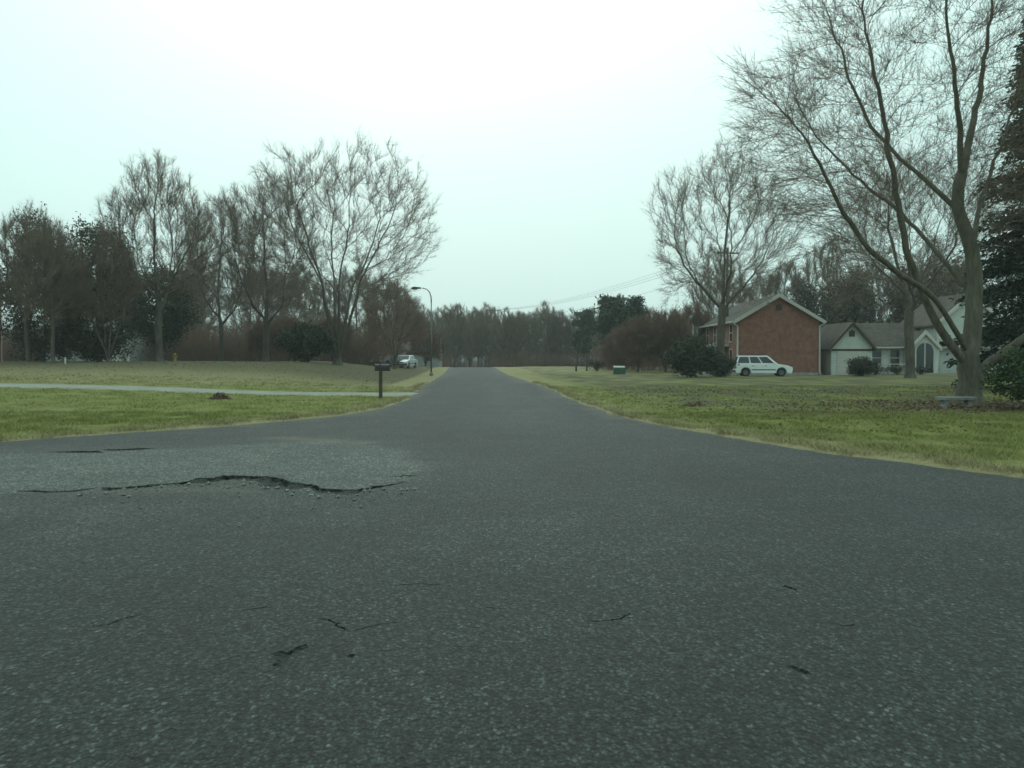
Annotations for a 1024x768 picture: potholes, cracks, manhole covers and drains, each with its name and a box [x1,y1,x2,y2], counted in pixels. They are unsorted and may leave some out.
crack [319,618,407,631]
